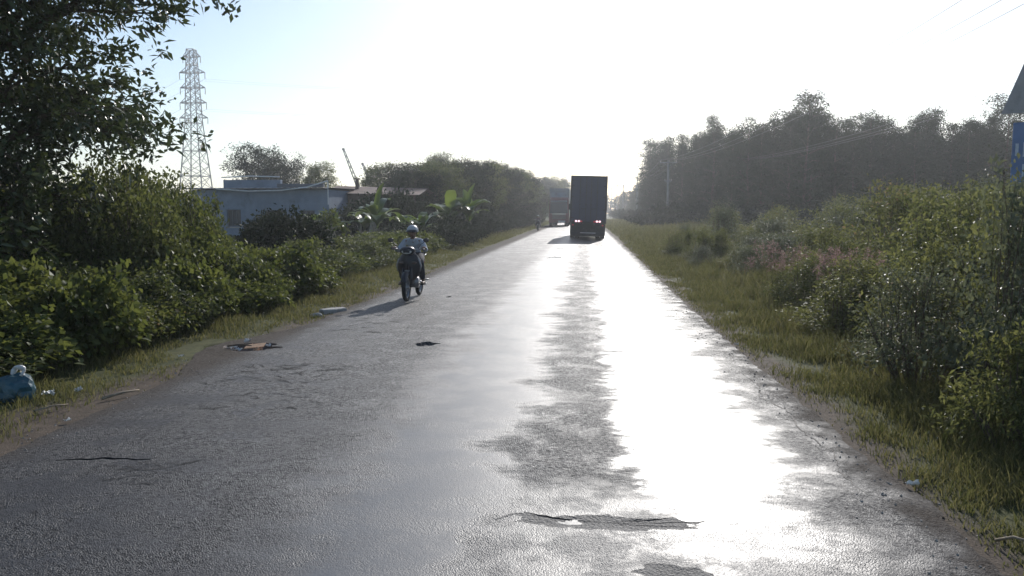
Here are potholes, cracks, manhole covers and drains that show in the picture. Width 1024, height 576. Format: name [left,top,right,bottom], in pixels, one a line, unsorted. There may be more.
crack [56,457,204,484]
pothole [631,562,713,576]
pothole [494,511,705,532]
